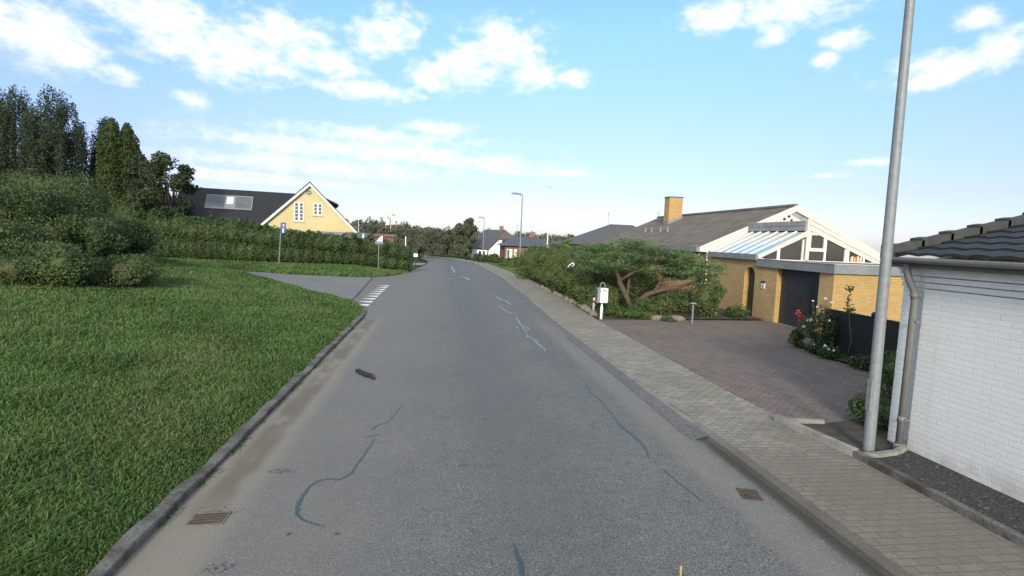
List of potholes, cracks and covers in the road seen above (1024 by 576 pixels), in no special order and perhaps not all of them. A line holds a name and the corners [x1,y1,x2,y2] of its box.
drain grate [736,488,764,501]
drain grate [184,511,232,526]
